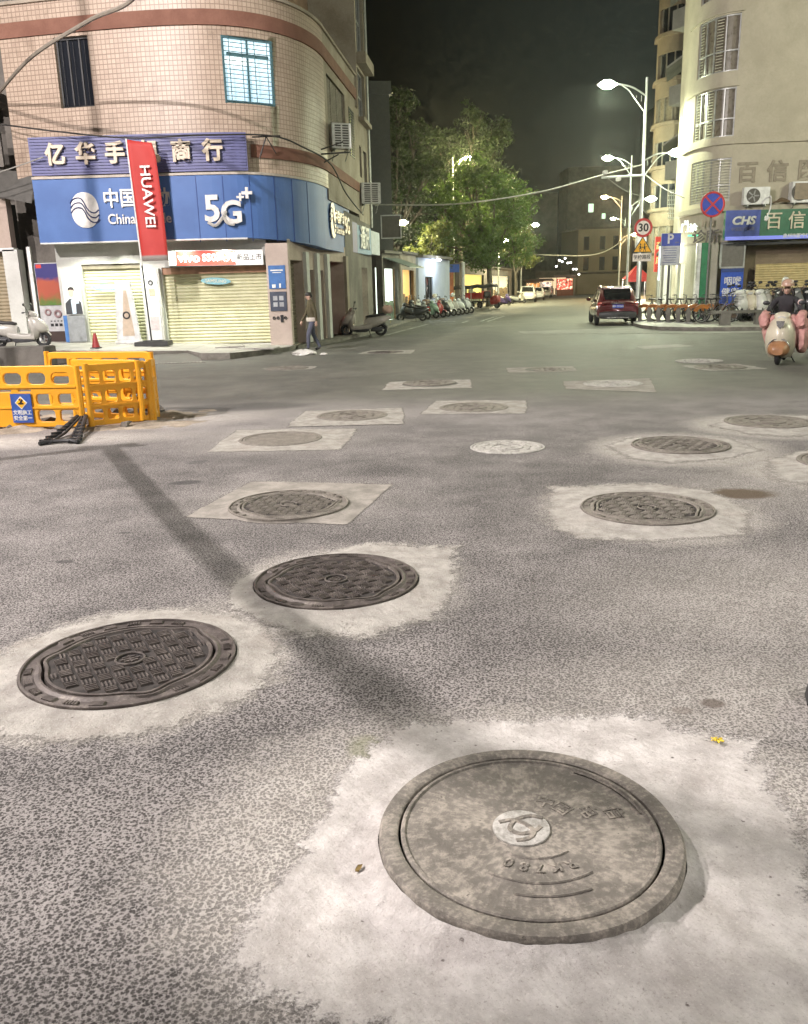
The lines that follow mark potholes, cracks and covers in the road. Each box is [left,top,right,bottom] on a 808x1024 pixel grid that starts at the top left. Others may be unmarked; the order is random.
manhole cover [724,415,808,428]
manhole cover [379,750,686,945]
manhole cover [239,431,322,446]
manhole cover [631,436,731,454]
manhole cover [581,492,716,526]
manhole cover [228,490,349,524]
manhole cover [470,440,545,454]
manhole cover [17,619,236,710]
manhole cover [253,553,418,610]
manhole cover [317,410,388,421]
